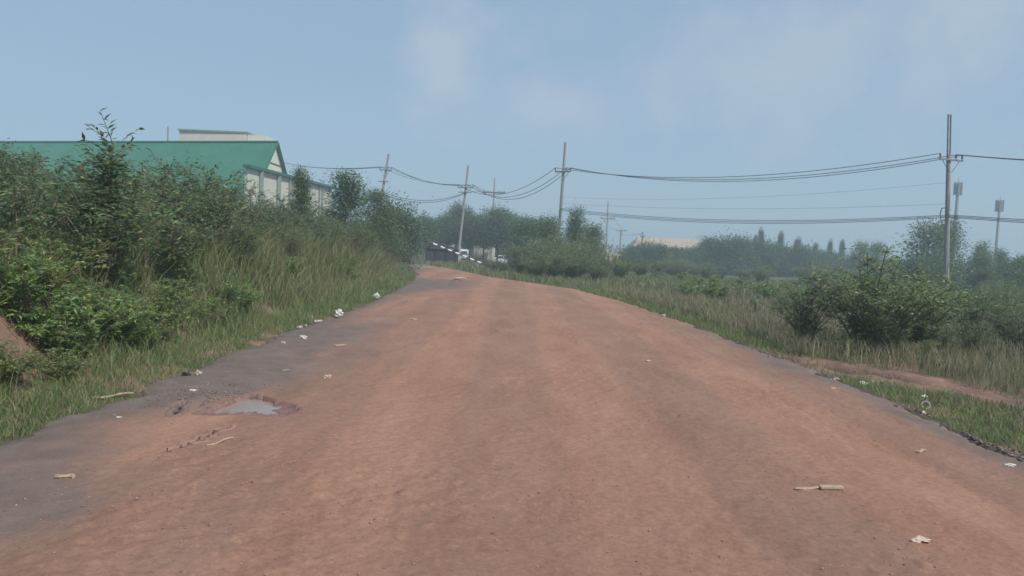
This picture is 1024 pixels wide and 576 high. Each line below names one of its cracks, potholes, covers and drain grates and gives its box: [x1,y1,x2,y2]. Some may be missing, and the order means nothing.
pothole [164,400,193,418]
pothole [191,394,304,417]
